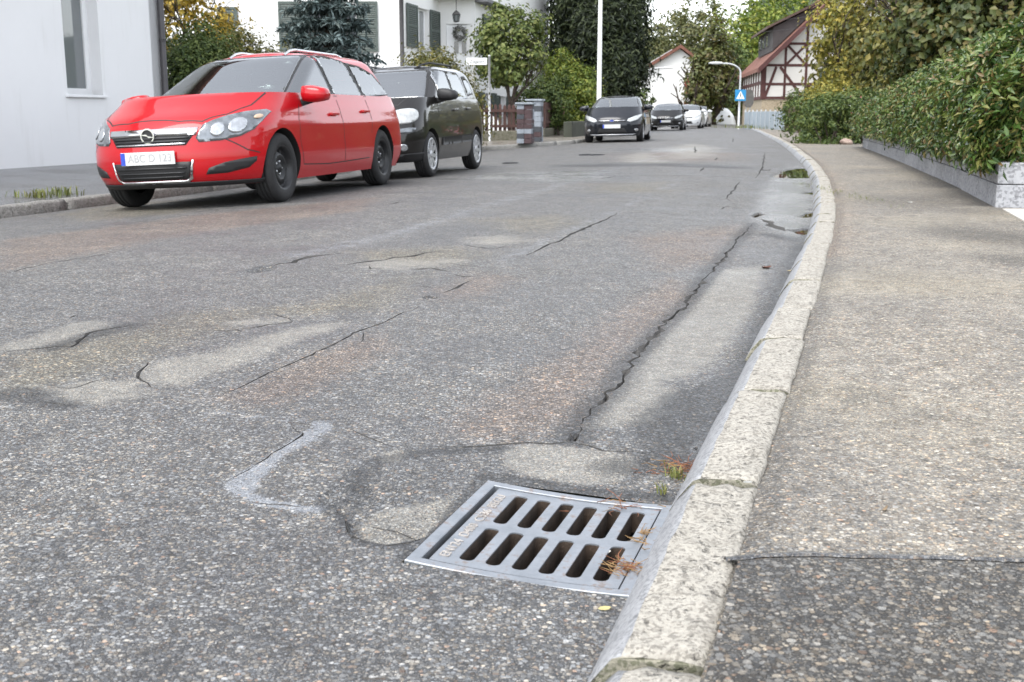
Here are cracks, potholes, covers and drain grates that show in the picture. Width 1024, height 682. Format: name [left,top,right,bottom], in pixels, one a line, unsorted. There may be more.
crack [216,306,419,395]
drain grate [404,480,672,598]
crack [680,139,765,209]
crack [273,251,475,293]
crack [136,362,161,390]
crack [3,316,129,353]
